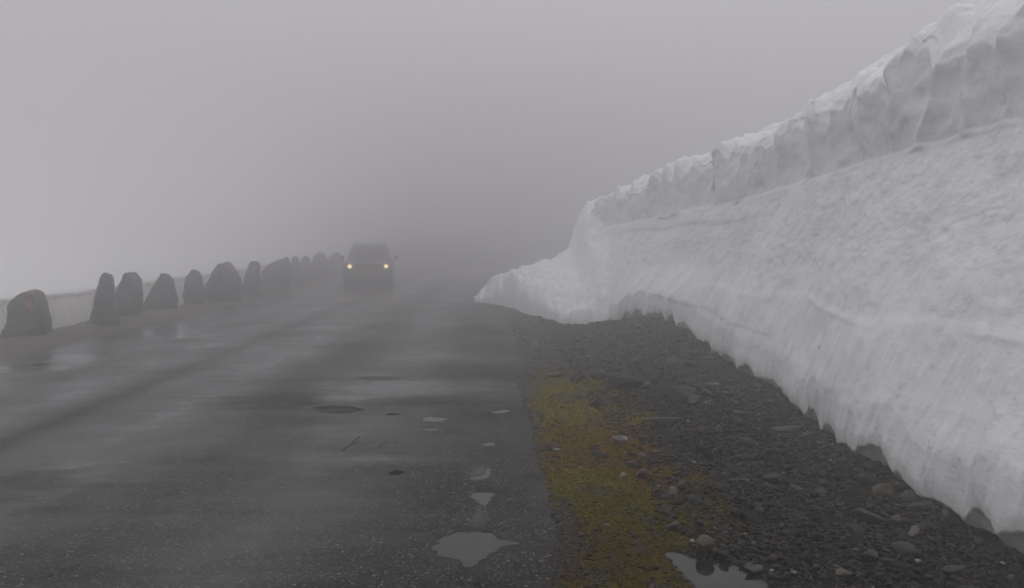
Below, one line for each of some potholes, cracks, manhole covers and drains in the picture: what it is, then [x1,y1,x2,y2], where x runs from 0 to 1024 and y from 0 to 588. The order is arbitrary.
pothole [430,531,521,568]
pothole [466,467,492,480]
pothole [468,492,495,506]
pothole [311,405,365,414]
